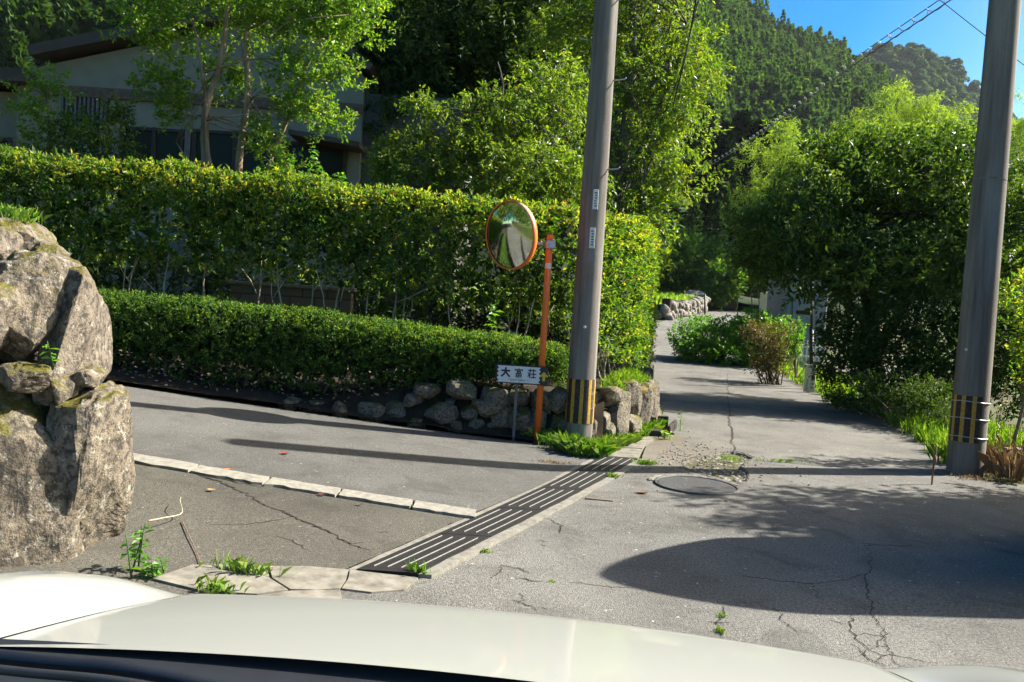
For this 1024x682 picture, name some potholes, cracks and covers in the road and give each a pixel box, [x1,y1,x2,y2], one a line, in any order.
crack [492,564,629,609]
crack [198,474,368,550]
manhole cover [648,474,739,496]
crack [747,543,930,666]
pothole [681,451,755,484]
